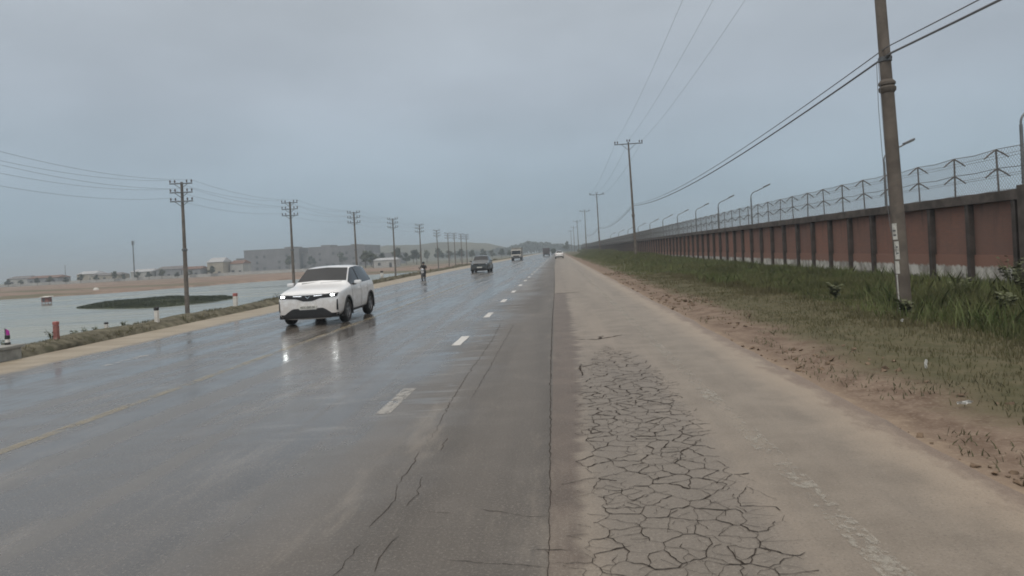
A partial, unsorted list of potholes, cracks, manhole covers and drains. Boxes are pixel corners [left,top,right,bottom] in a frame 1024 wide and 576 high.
crack [453,549,564,567]
crack [334,325,512,575]
